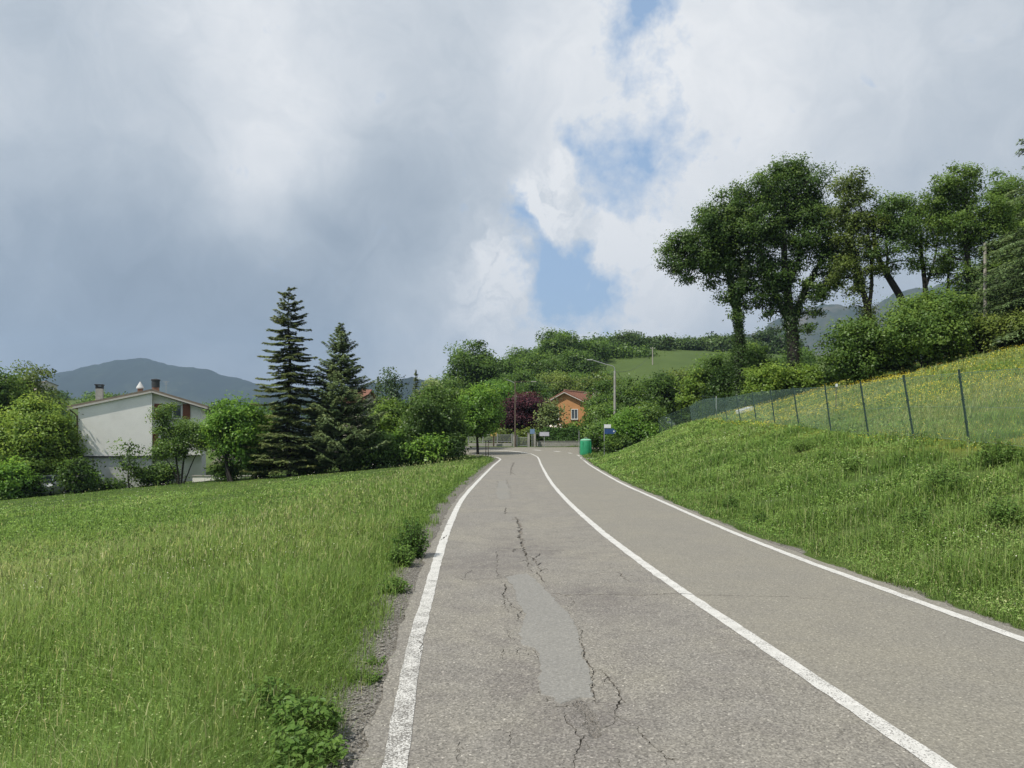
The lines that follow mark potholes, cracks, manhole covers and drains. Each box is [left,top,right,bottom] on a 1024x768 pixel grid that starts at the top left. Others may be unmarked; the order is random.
crack [456,508,866,659]
crack [538,628,679,768]
